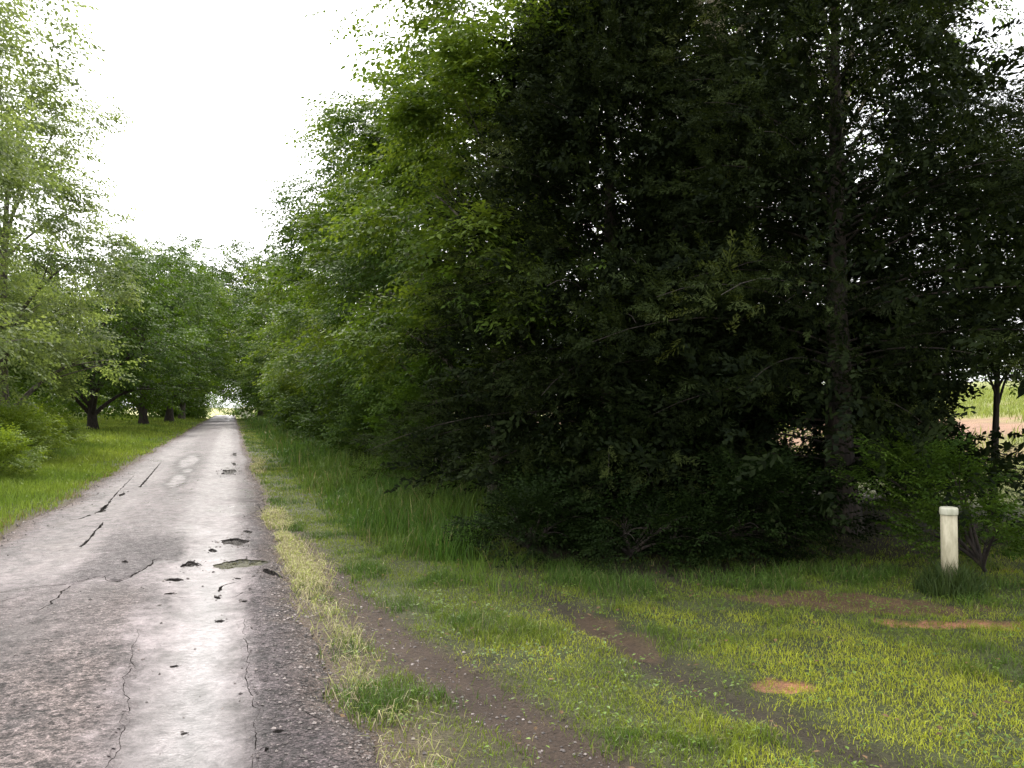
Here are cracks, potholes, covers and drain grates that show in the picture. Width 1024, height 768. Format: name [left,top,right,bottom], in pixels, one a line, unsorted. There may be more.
pothole [218,537,253,547]
pothole [259,568,284,579]
pothole [177,560,205,569]
crack [0,461,257,611]
pothole [209,558,271,571]
